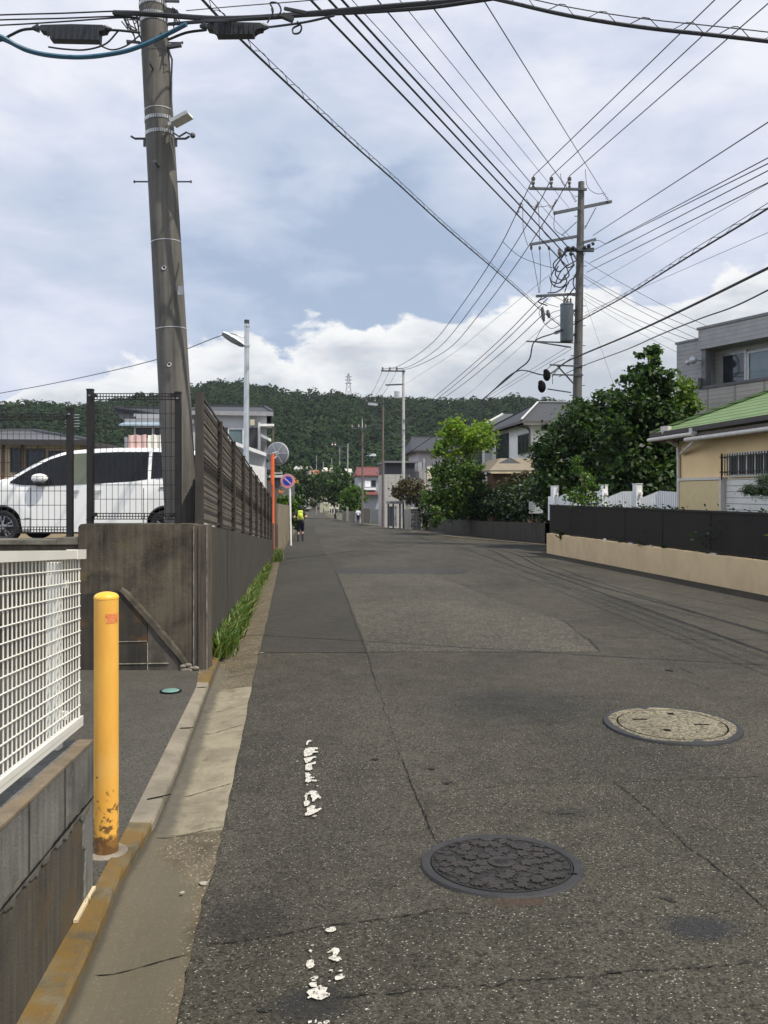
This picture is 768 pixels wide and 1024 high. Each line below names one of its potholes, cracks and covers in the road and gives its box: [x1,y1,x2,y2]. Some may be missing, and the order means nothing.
manhole cover [420,835,584,899]
manhole cover [603,706,744,747]
crack [333,961,750,998]
crack [614,783,768,910]
